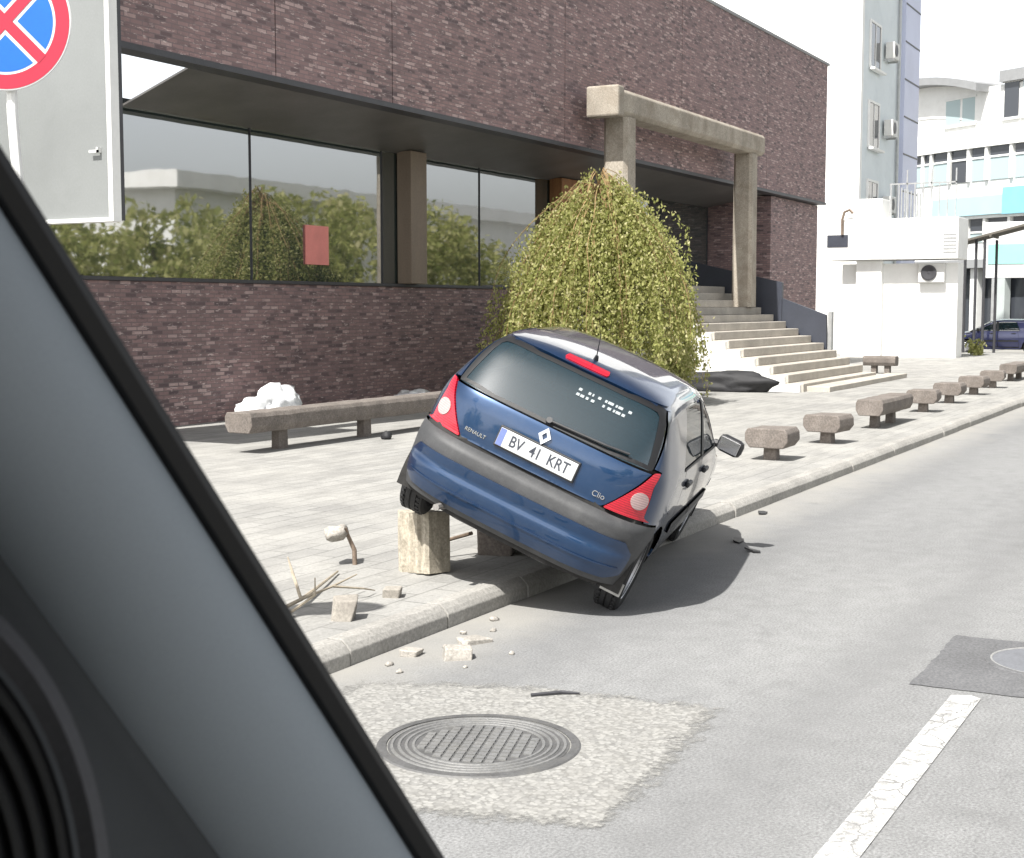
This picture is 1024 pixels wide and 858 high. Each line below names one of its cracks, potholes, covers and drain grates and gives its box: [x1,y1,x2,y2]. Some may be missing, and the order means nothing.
manhole cover [376,714,581,779]
manhole cover [983,646,1024,675]
